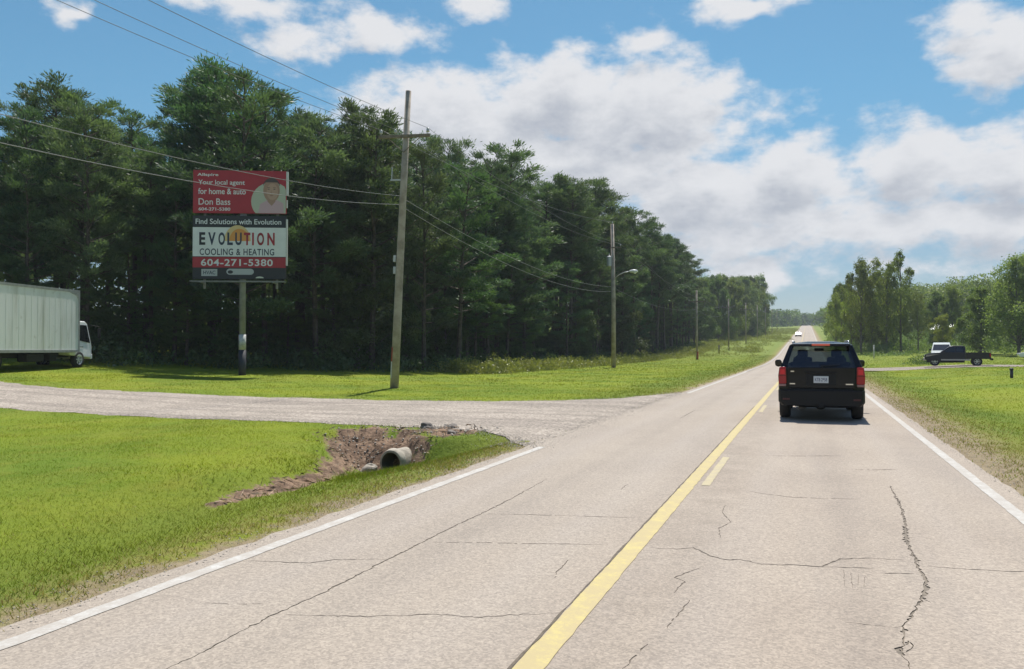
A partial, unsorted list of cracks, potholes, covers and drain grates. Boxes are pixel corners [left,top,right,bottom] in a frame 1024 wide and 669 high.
crack [167,480,627,669]
crack [652,487,1024,669]
